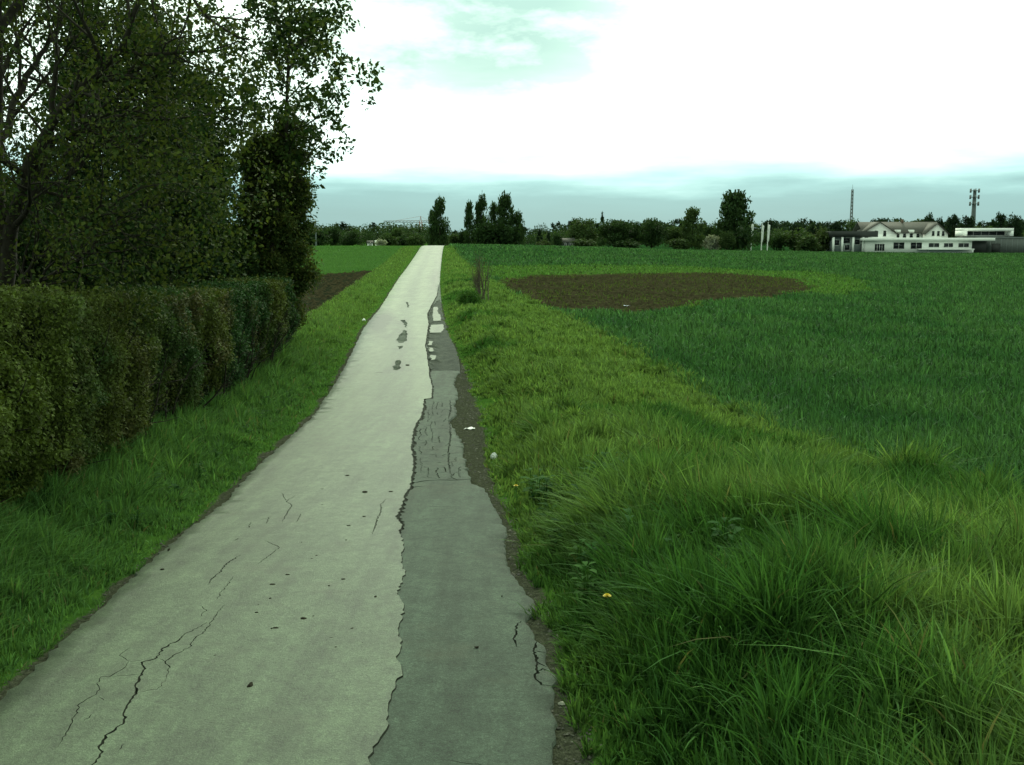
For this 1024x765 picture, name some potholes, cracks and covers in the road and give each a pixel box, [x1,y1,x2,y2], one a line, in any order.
crack [59,558,236,765]
crack [513,621,551,686]
crack [368,292,468,762]
